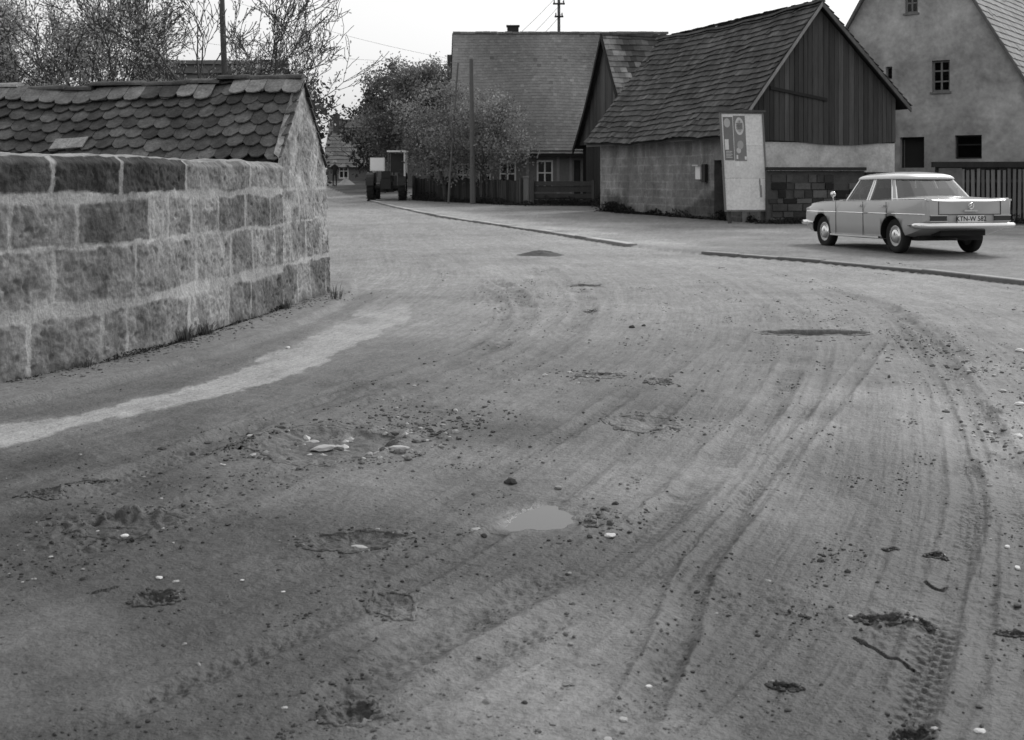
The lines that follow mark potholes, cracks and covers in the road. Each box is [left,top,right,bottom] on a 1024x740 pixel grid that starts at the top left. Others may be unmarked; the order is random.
pothole [849,613,909,626]
pothole [294,528,417,554]
pothole [131,588,182,608]
pothole [600,413,687,434]
pothole [317,699,386,727]
pothole [365,590,420,621]
pothole [768,681,803,691]
pothole [993,629,1024,638]
pothole [468,495,601,538]
pothole [19,485,65,501]
pothole [61,504,196,541]
pothole [244,421,420,467]
